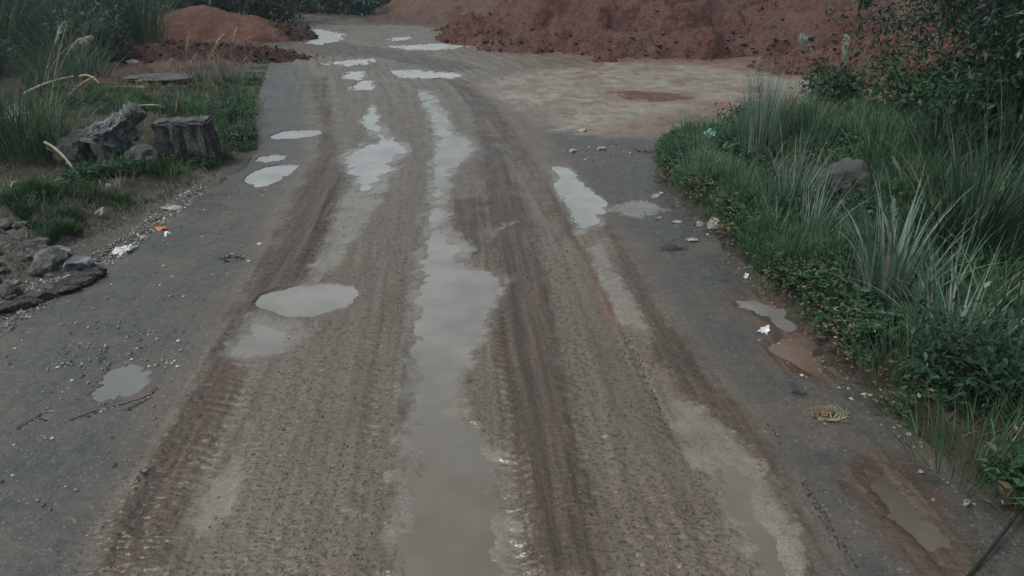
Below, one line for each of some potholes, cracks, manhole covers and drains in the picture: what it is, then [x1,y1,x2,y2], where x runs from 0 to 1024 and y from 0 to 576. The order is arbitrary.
pothole [253,281,365,321]
pothole [266,129,323,139]
crack [74,387,159,420]
pothole [82,360,160,406]
pothole [238,164,301,188]
